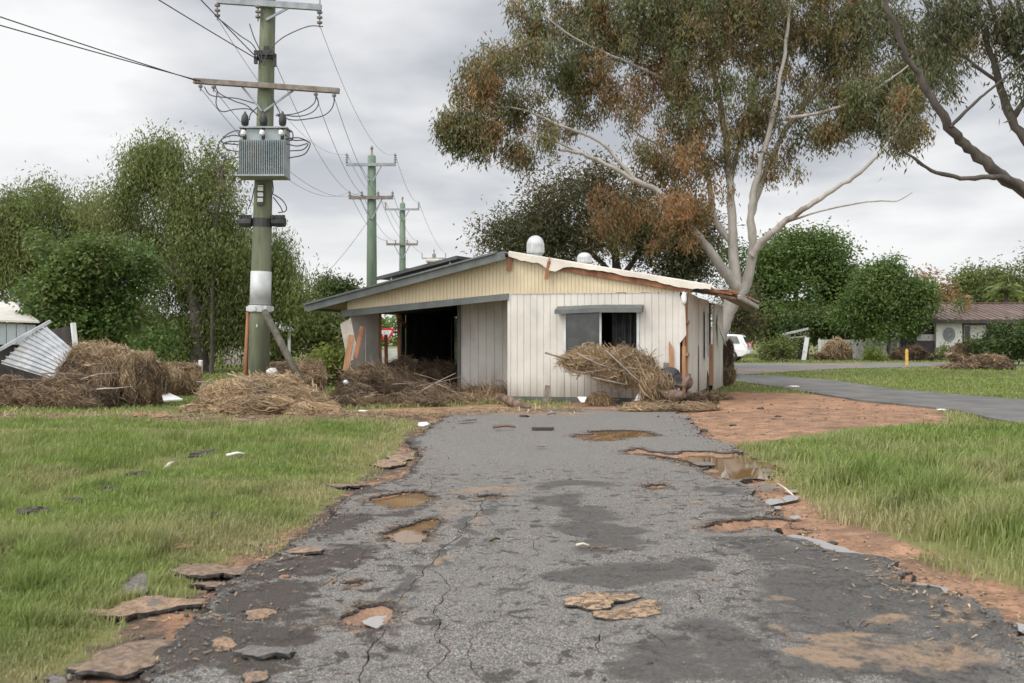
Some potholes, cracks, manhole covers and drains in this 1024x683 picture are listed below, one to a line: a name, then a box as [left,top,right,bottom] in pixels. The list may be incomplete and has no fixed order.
pothole [369,491,437,509]
pothole [700,517,813,536]
crack [394,493,493,683]
pothole [340,603,395,630]
crack [358,627,394,683]
pothole [573,430,661,441]
pothole [624,447,791,482]
pothole [383,518,442,543]
